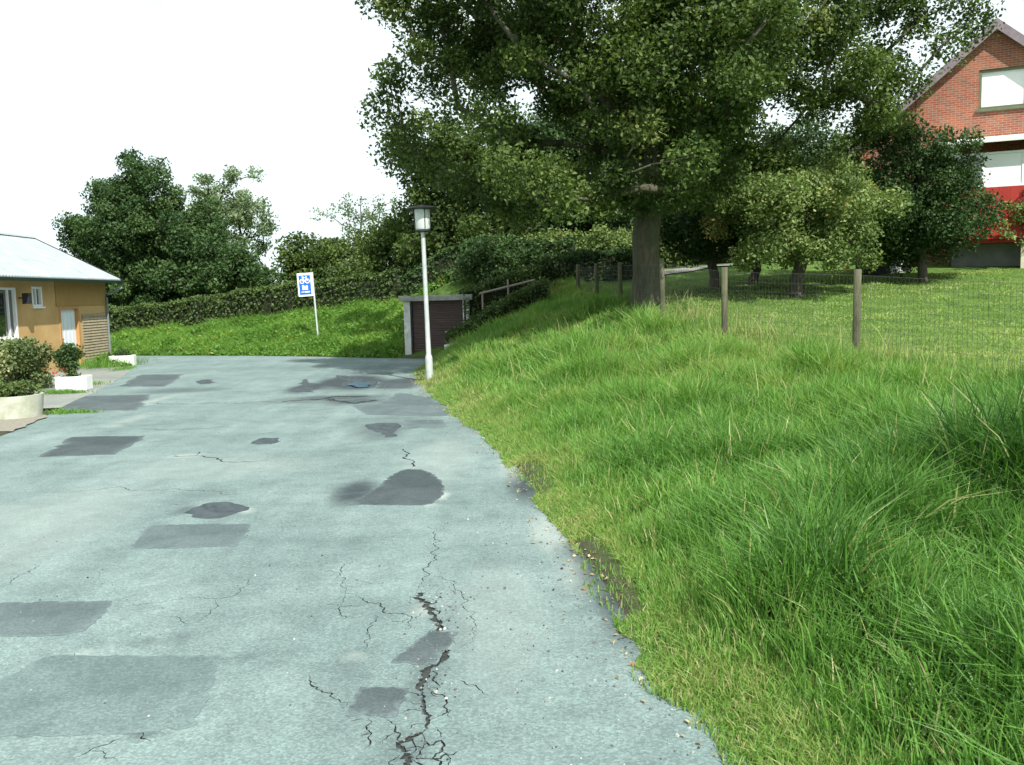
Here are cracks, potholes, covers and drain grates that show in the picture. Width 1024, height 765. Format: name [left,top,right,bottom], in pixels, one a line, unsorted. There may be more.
crack [309,527,485,765]
